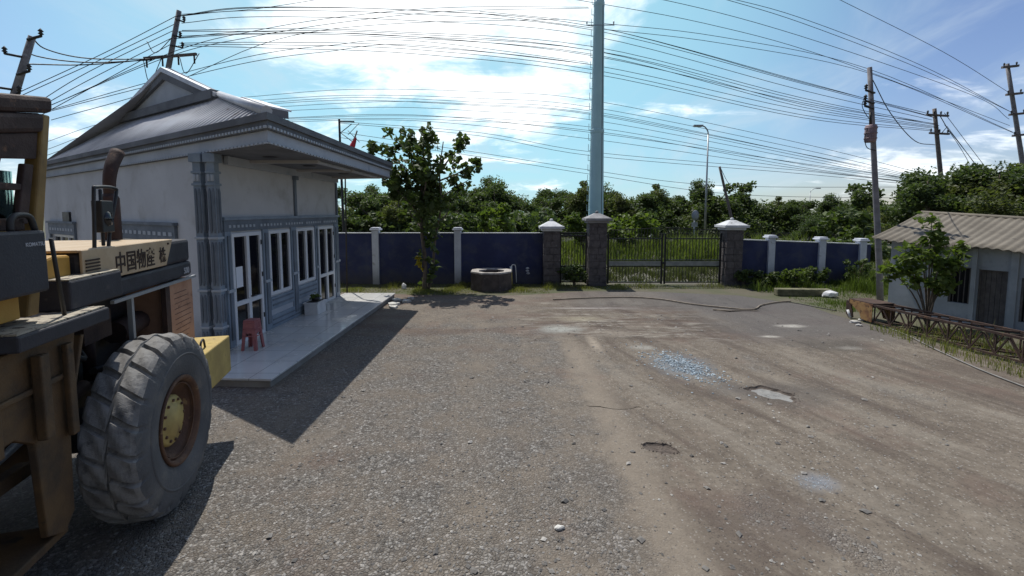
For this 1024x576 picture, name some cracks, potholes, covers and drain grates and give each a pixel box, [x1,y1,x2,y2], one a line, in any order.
pothole [741,383,800,402]
pothole [638,441,680,455]
